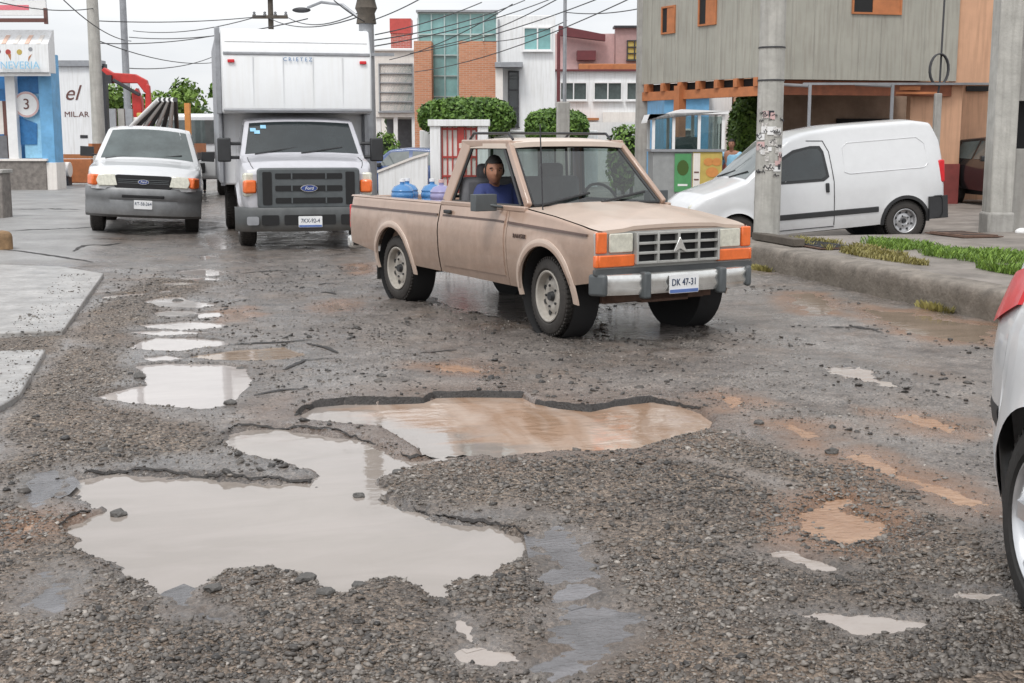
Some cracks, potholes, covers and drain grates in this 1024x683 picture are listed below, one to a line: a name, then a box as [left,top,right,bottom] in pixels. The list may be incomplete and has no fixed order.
pothole [454,649,519,666]
pothole [58,423,529,598]
crack [229,339,339,369]
pothole [145,297,218,308]
pothole [100,364,252,409]
crack [3,227,119,262]
pothole [795,499,888,544]
pothole [296,390,712,458]
pothole [140,321,228,330]
pothole [130,338,228,351]
